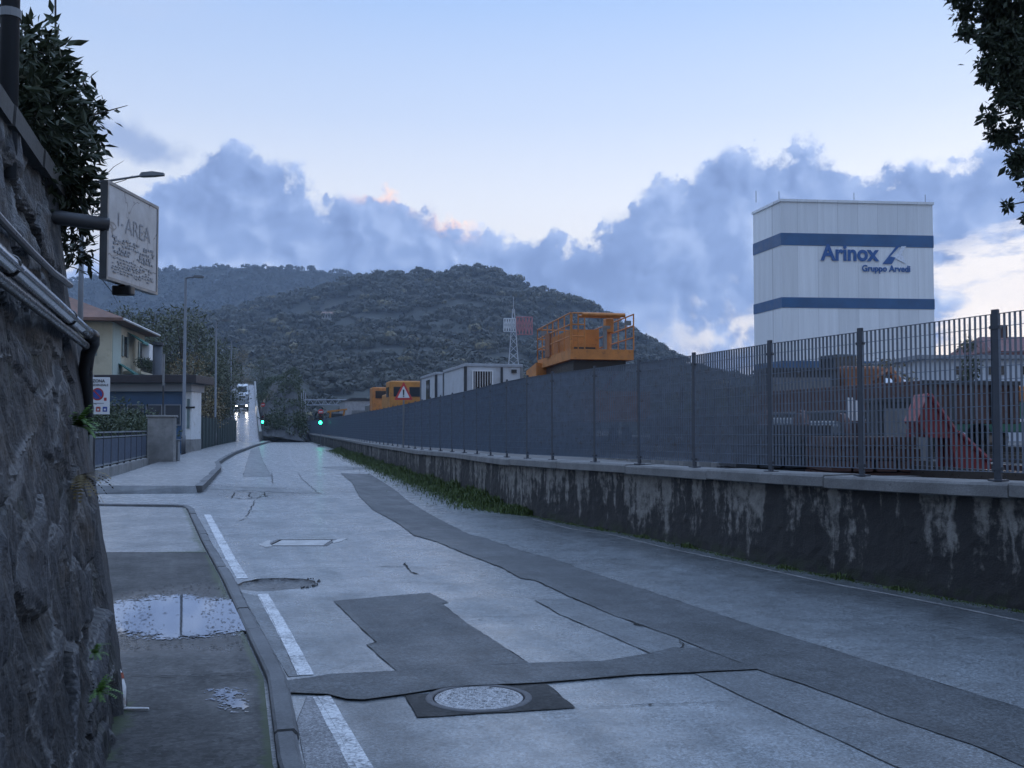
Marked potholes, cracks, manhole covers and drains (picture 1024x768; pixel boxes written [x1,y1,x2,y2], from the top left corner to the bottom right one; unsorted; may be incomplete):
pothole [238,578,321,591]
crack [231,491,272,521]
manhole cover [425,684,532,712]
manhole cover [258,538,347,547]
